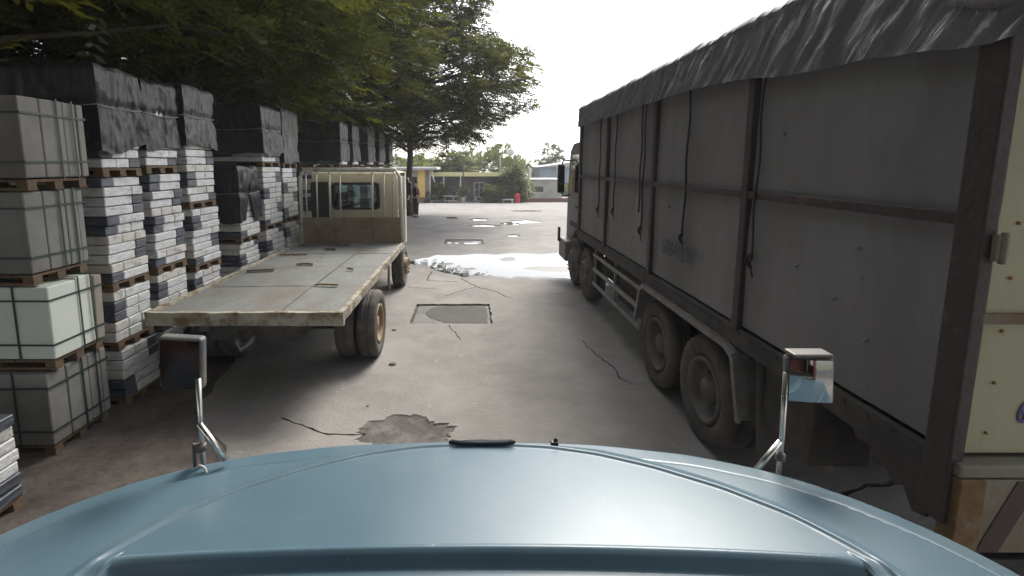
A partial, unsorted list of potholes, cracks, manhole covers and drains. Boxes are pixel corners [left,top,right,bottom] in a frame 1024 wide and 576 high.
crack [280,417,365,436]
manhole cover [410,304,493,324]
crack [839,480,895,496]
crack [413,272,511,298]
crack [583,341,636,386]
pothole [354,414,458,444]
